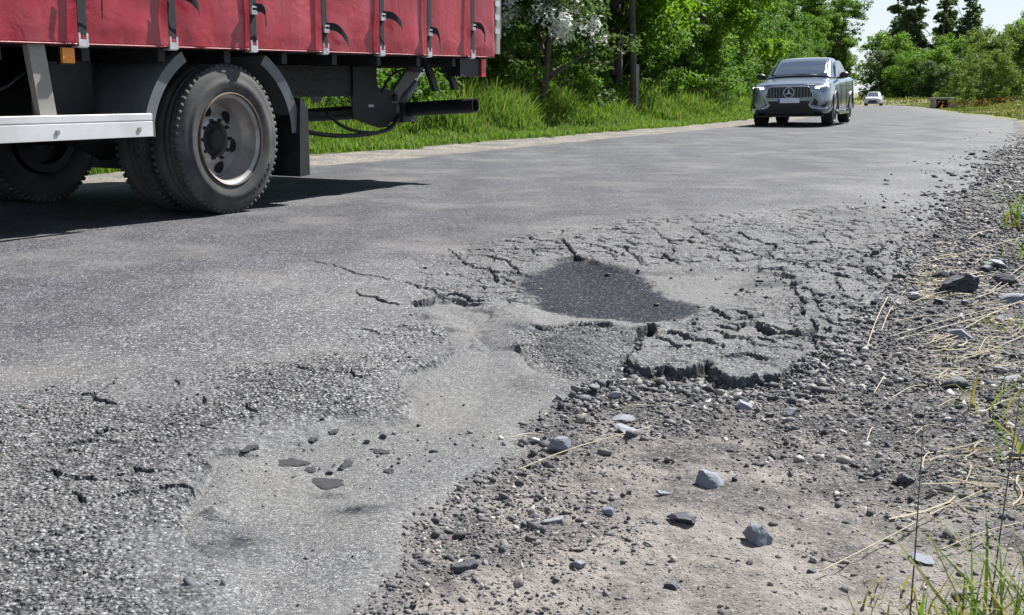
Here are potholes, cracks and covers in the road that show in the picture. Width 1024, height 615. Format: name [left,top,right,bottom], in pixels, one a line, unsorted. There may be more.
crack [313,204,927,361]
